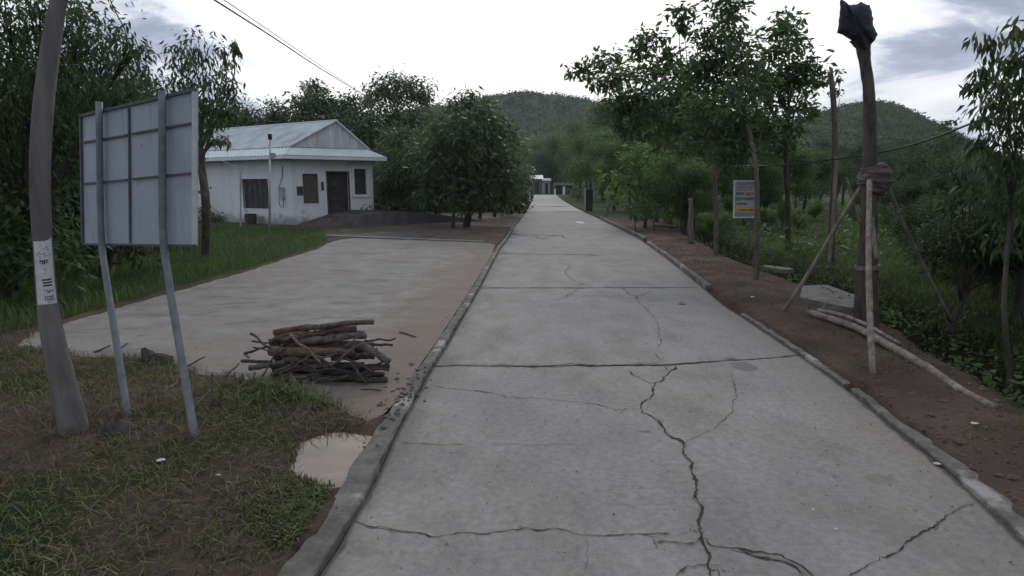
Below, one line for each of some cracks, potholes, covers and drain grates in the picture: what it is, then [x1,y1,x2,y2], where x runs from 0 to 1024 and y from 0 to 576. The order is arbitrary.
crack [355,288,814,576]
crack [850,503,974,576]
